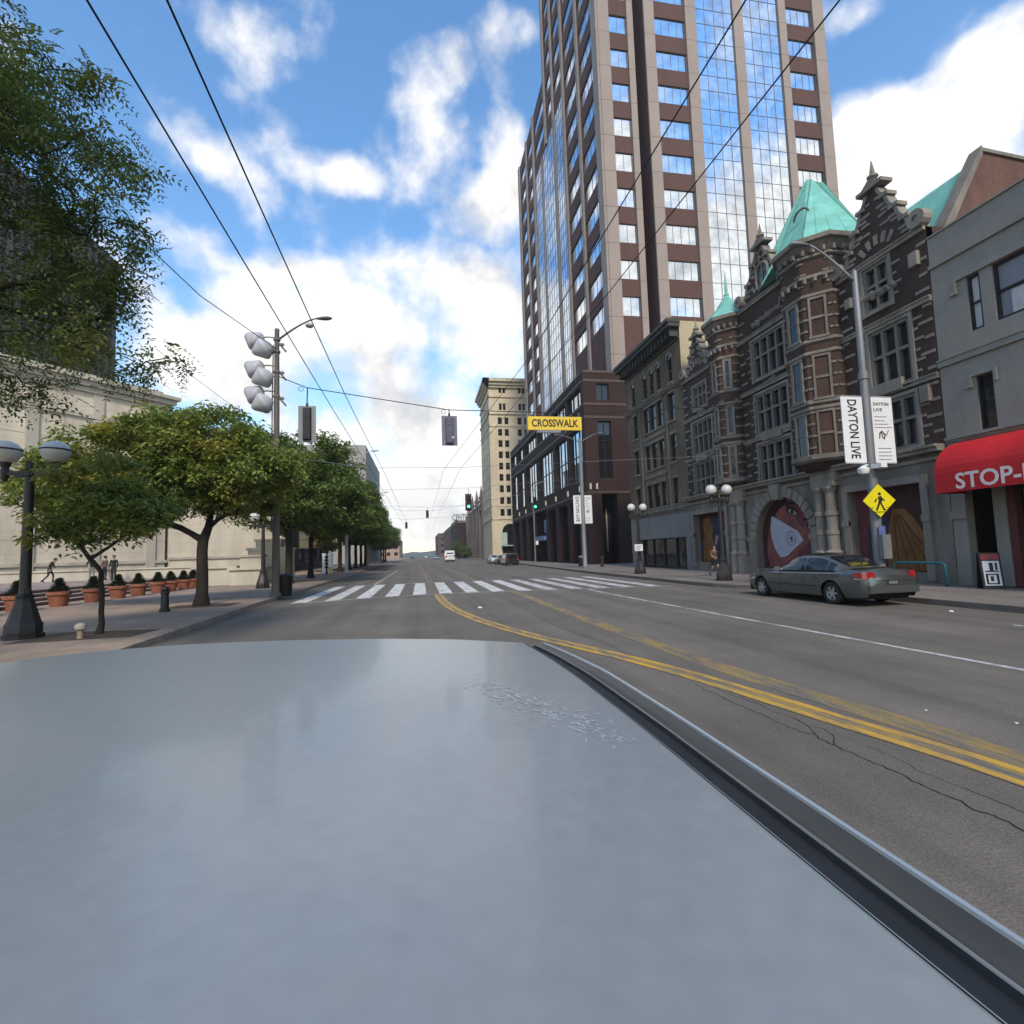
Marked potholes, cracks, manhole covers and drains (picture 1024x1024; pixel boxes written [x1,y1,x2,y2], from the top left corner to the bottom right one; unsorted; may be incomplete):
crack [696,684,1024,831]
